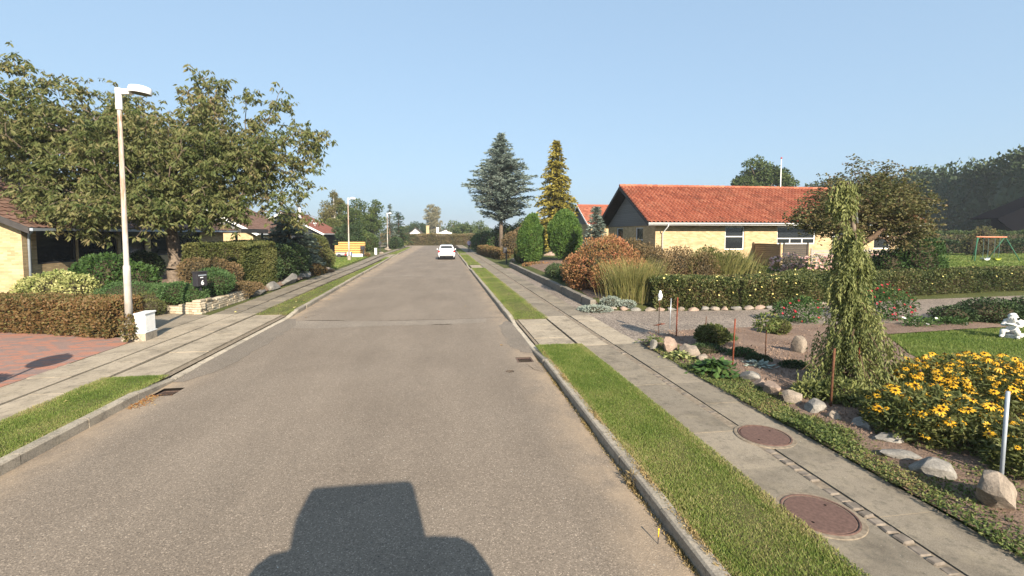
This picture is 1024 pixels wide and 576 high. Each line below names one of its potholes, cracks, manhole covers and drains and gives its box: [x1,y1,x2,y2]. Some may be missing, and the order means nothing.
manhole cover [733,424,797,449]
drain grate [151,388,183,396]
manhole cover [775,492,869,541]
